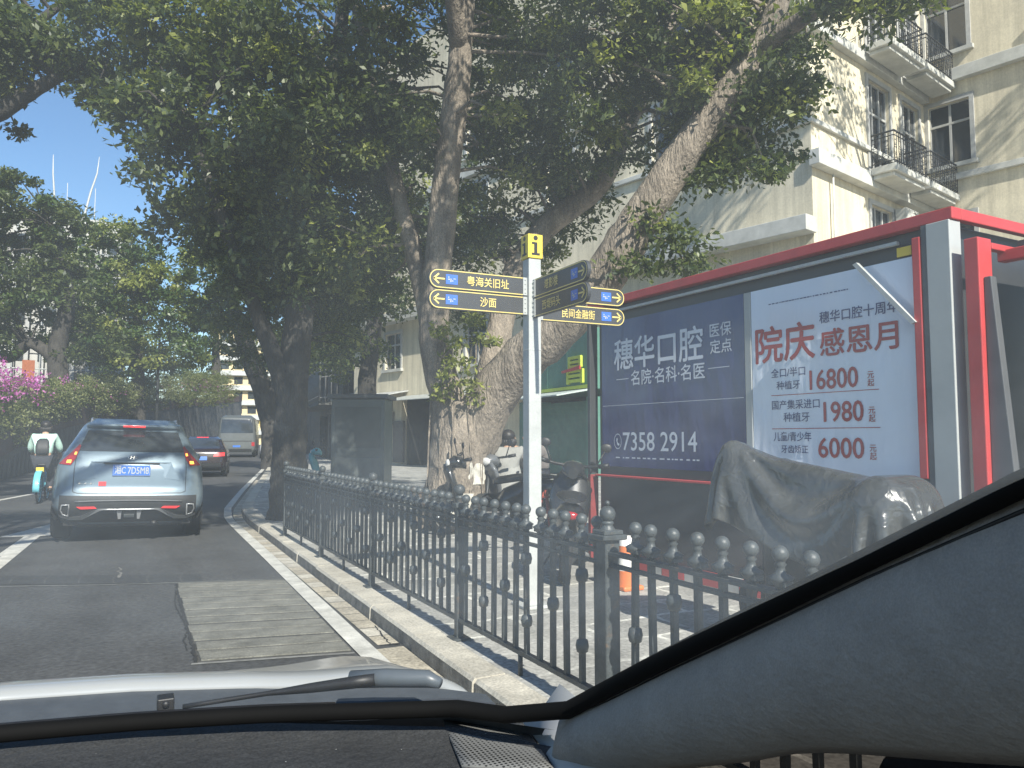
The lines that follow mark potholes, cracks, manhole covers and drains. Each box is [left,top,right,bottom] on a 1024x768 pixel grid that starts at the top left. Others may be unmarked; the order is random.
crack [174,584,198,663]
